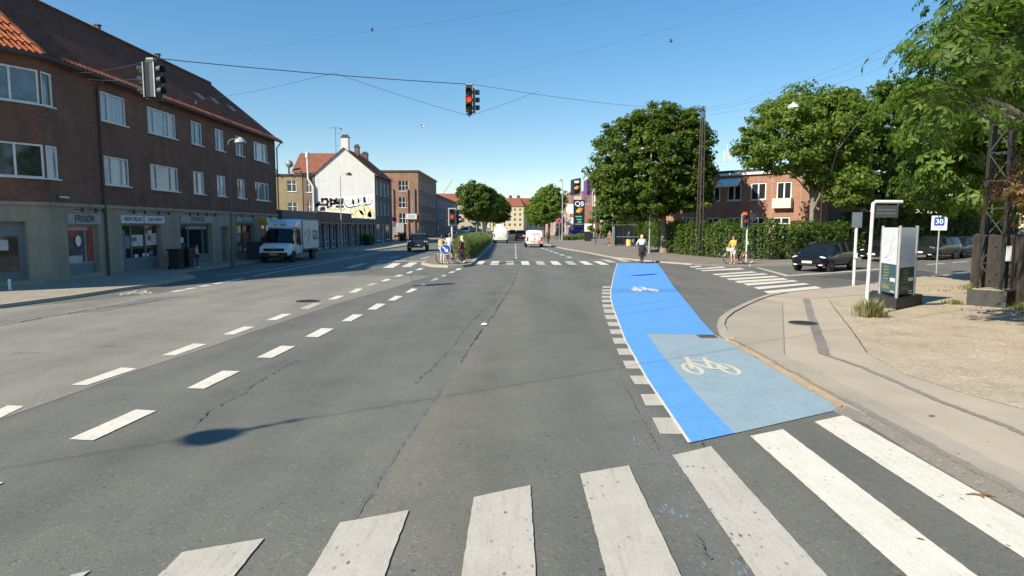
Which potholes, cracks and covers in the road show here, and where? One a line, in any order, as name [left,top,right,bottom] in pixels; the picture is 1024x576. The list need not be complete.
crack [193,360,297,425]
crack [414,264,537,383]
